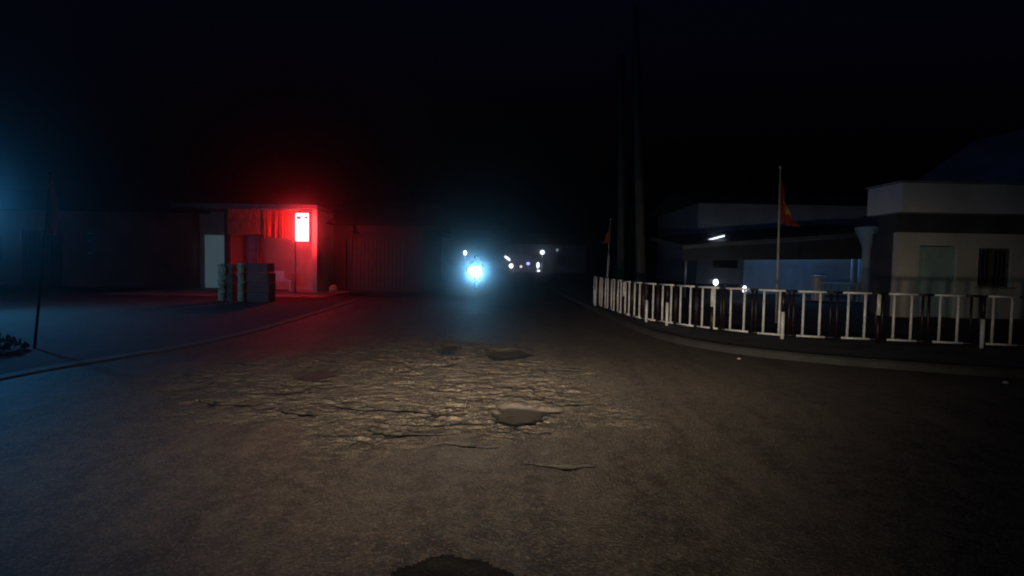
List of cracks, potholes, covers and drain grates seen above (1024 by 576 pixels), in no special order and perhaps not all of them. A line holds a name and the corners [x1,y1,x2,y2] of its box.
pothole [489,401,566,427]
pothole [291,366,343,382]
crack [336,404,554,448]
pothole [391,555,514,576]
pothole [484,347,539,361]
crack [523,462,596,471]
pothole [436,343,462,354]
